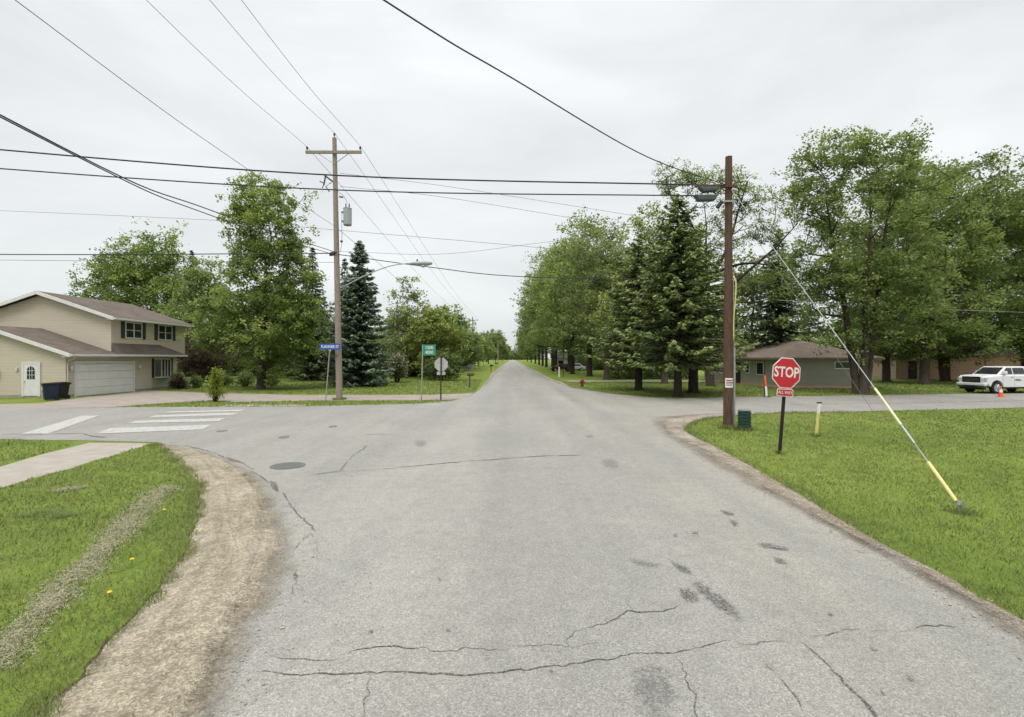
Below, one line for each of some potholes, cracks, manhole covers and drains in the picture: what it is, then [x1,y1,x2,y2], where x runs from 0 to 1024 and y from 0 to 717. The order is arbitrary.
crack [262,600,725,717]
crack [809,624,955,637]
crack [186,445,317,548]
crack [312,434,569,475]
